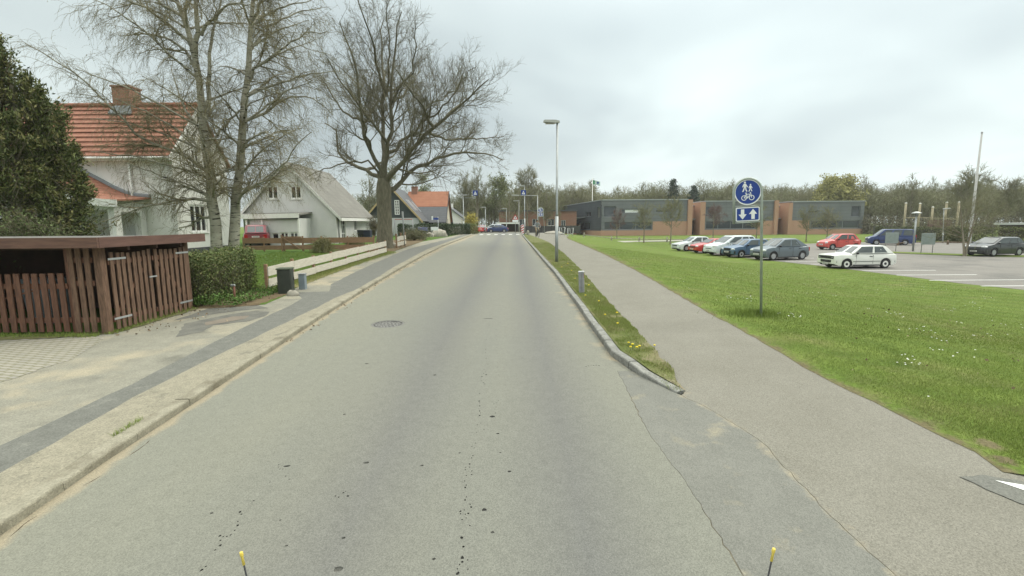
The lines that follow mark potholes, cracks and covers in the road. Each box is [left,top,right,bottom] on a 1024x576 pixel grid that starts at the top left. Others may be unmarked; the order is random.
manhole cover [371,320,405,328]
